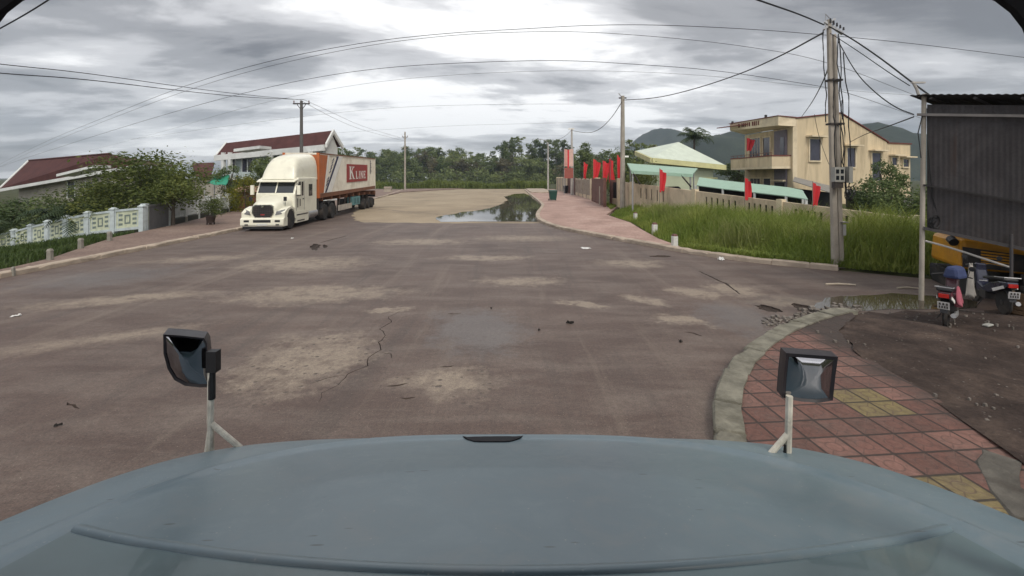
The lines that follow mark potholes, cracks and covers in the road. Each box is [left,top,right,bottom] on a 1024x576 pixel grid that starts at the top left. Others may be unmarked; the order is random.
crack [313,310,402,401]
pothole [755,304,783,312]
